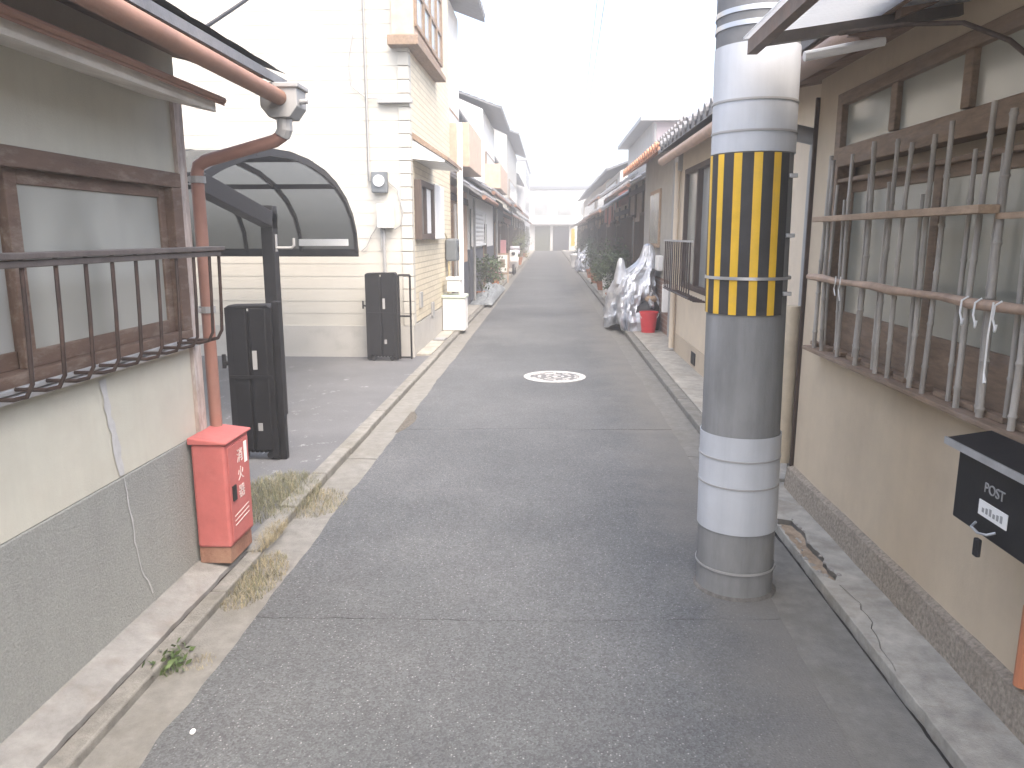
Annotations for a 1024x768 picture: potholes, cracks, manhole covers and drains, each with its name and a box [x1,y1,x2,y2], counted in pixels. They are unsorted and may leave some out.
crack [775,532,953,768]
pothole [777,518,842,580]
manhole cover [524,371,586,383]
